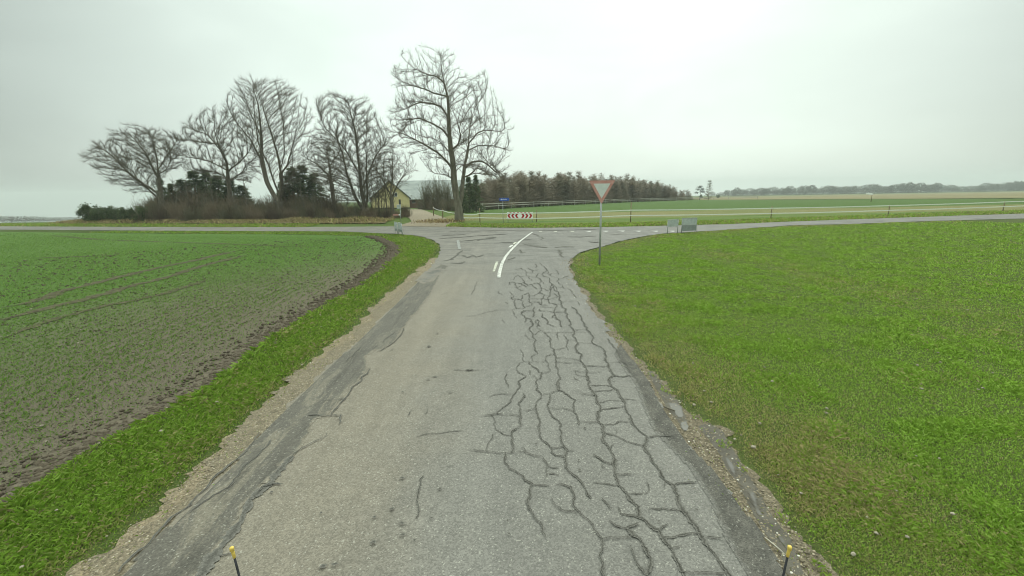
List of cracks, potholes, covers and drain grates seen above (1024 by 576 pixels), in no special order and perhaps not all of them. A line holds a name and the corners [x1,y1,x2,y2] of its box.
crack [416,476,424,518]
crack [444,233,732,576]
